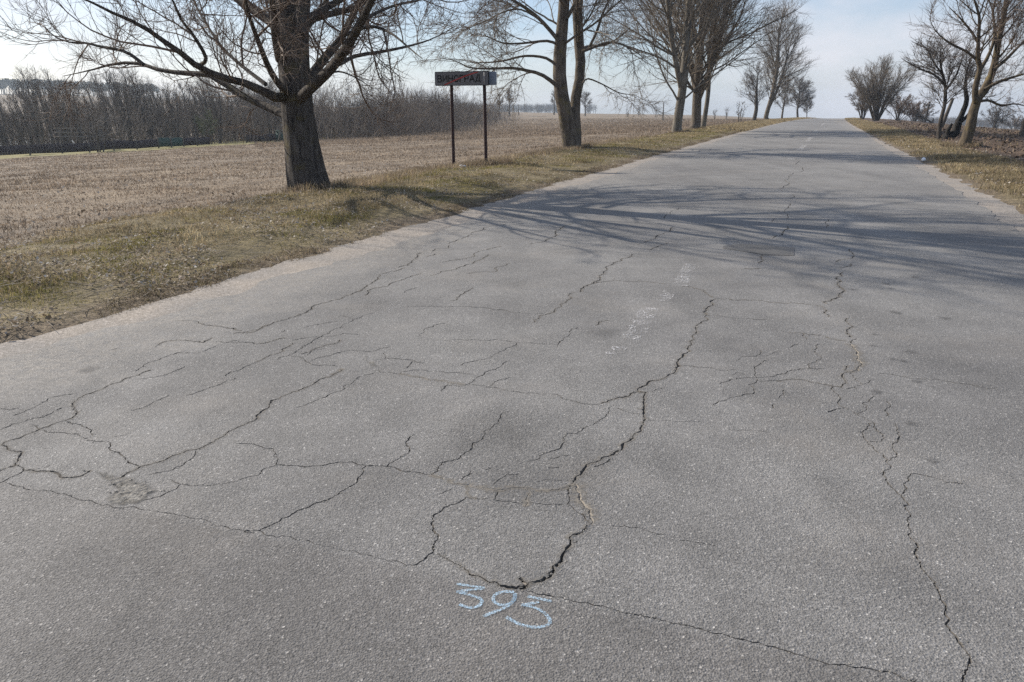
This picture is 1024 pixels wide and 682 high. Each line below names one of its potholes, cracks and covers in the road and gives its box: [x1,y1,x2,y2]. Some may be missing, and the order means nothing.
crack [749,154,815,276]
crack [0,208,997,682]
